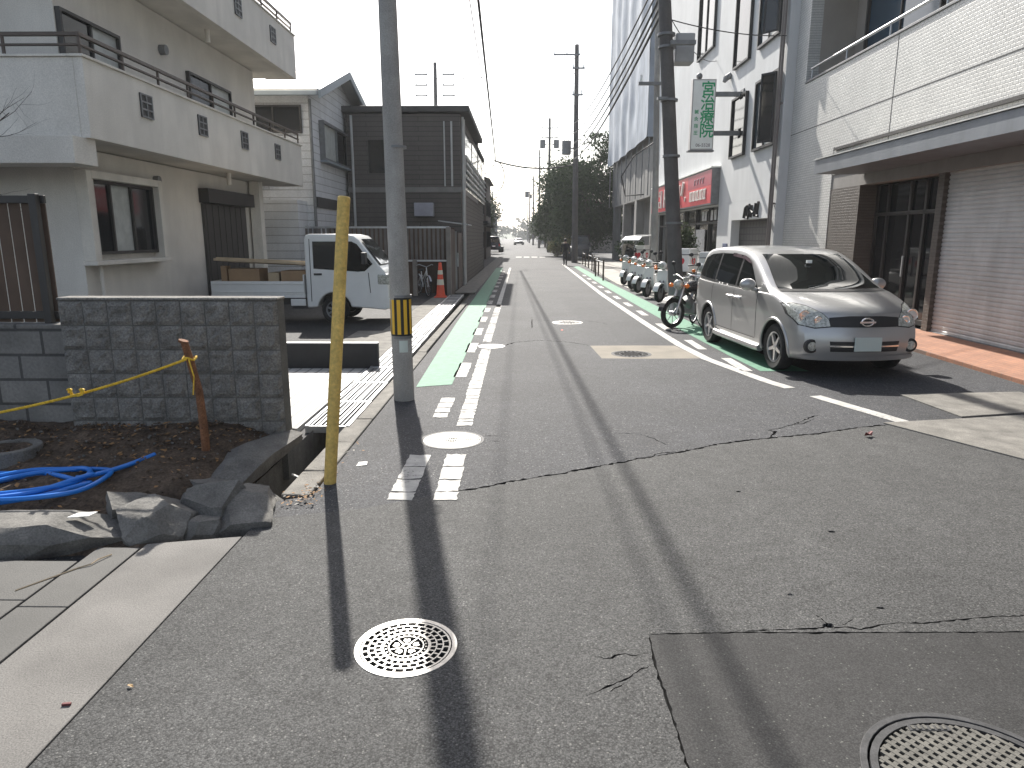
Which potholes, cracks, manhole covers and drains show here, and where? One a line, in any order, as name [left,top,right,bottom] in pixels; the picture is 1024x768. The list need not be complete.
manhole cover [860,712,1024,768]
manhole cover [420,431,484,449]
drain grate [305,401,372,433]
manhole cover [354,619,457,678]
drain grate [340,382,388,402]
crack [453,415,885,492]
drain grate [354,367,393,384]
crack [587,615,1024,768]
